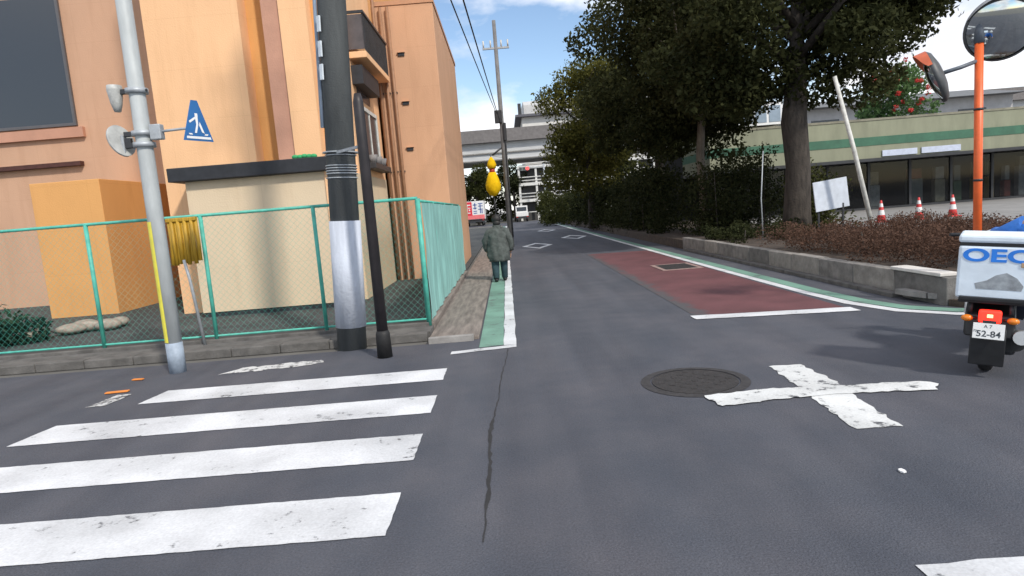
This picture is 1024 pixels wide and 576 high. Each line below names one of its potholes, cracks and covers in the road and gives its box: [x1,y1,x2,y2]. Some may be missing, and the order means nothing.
manhole cover [650,262,704,271]
crack [482,349,508,542]
manhole cover [641,367,751,397]
